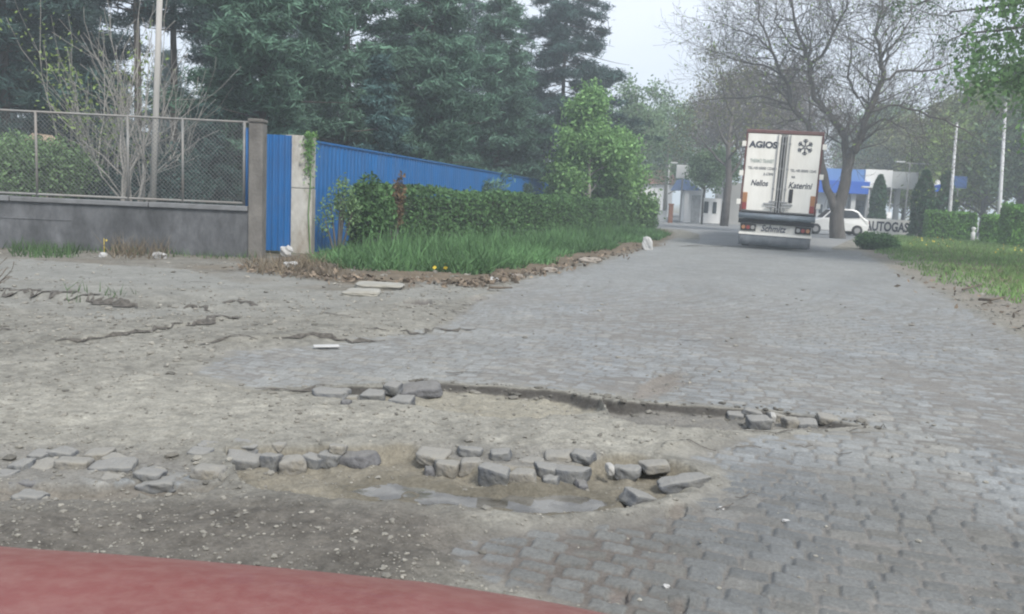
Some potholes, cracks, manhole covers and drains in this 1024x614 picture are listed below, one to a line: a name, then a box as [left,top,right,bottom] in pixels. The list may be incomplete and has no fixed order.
pothole [602,398,863,432]
pothole [226,437,715,517]
pothole [285,382,608,423]
crack [0,288,472,344]
